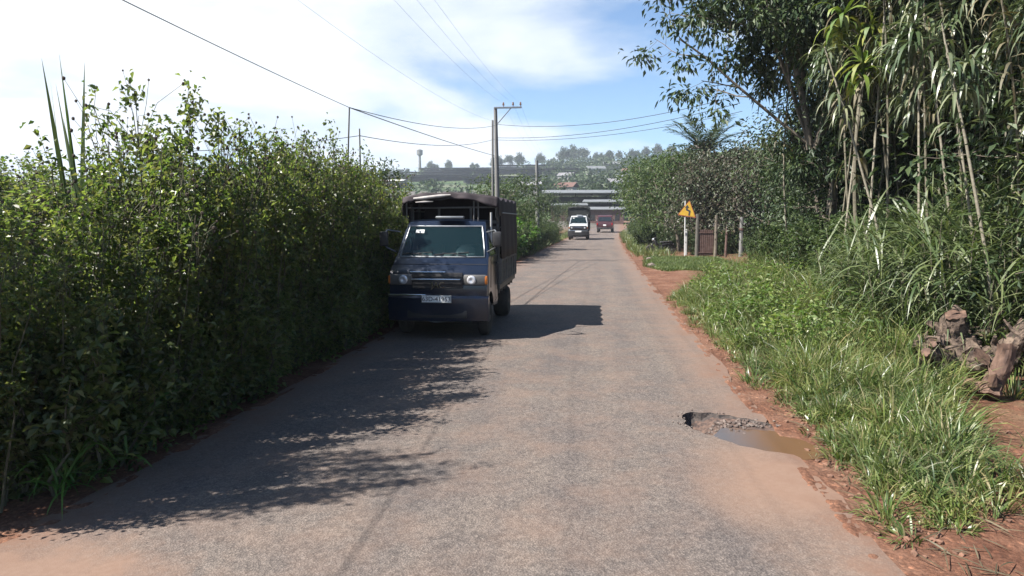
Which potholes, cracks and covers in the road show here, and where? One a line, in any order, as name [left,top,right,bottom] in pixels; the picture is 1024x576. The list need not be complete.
pothole [671,409,780,438]
